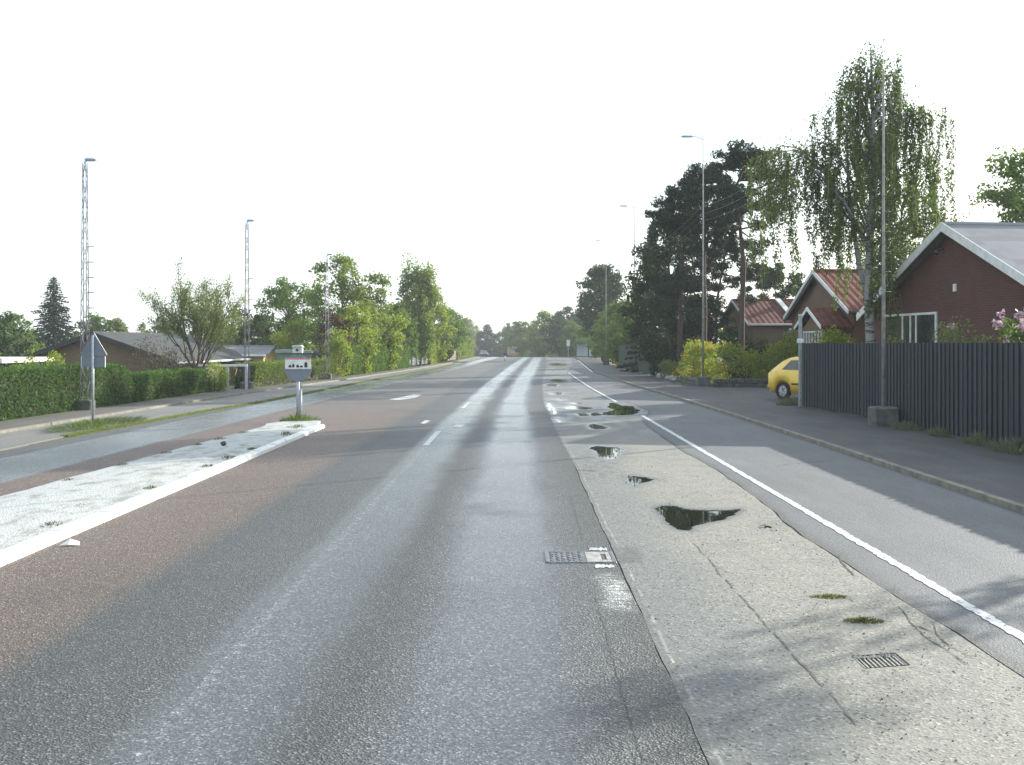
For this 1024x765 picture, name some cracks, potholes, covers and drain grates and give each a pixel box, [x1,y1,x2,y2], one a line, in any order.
drain grate [852,653,910,668]
crack [655,432,997,665]
crack [691,541,858,726]
pothole [589,445,623,460]
pothole [602,403,640,415]
pothole [622,475,654,486]
pothole [654,503,747,530]
